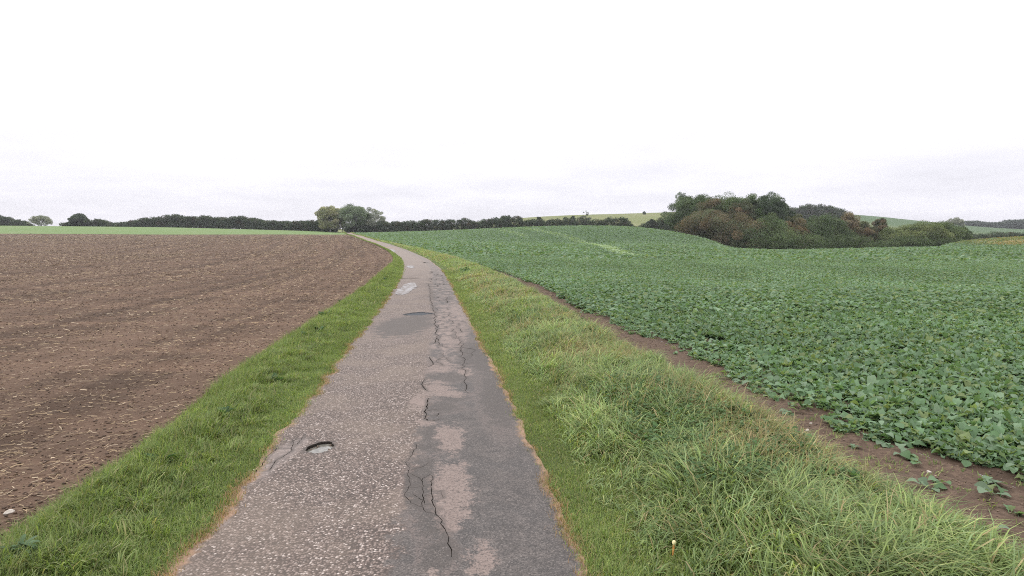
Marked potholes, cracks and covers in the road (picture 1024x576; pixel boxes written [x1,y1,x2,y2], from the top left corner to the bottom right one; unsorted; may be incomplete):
crack [421,274,475,421]
pothole [305,441,334,453]
crack [404,445,452,557]
